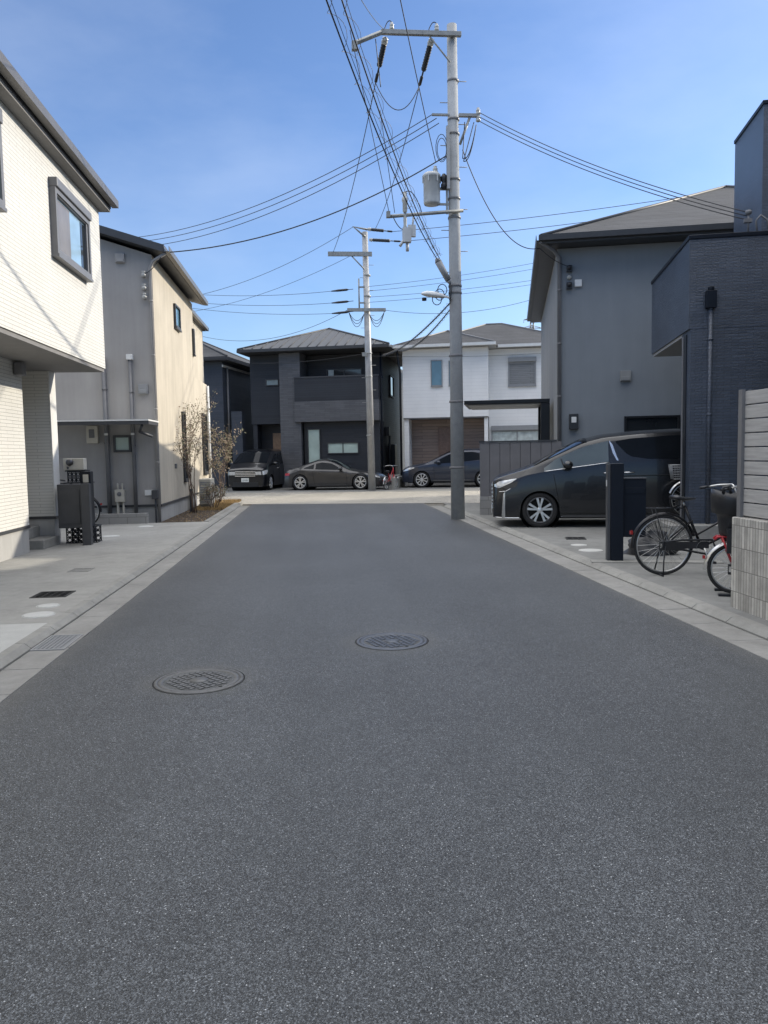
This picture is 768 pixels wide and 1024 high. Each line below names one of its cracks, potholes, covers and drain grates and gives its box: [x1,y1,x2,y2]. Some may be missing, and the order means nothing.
drain grate [30,634,83,651]
manhole cover [152,667,245,694]
manhole cover [355,632,429,650]
